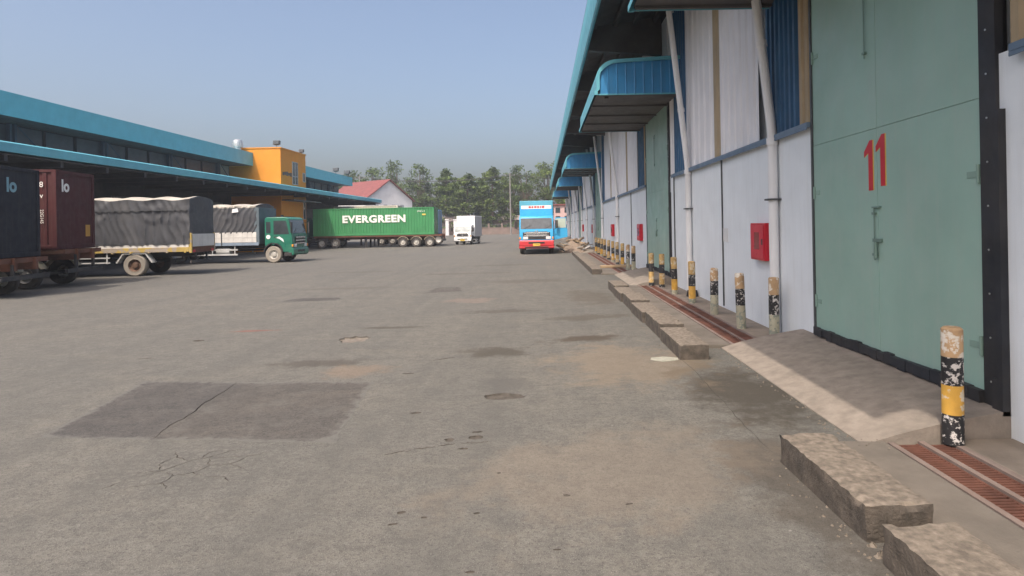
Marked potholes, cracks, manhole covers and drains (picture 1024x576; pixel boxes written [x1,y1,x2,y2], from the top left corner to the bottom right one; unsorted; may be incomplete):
crack [102,448,266,489]
